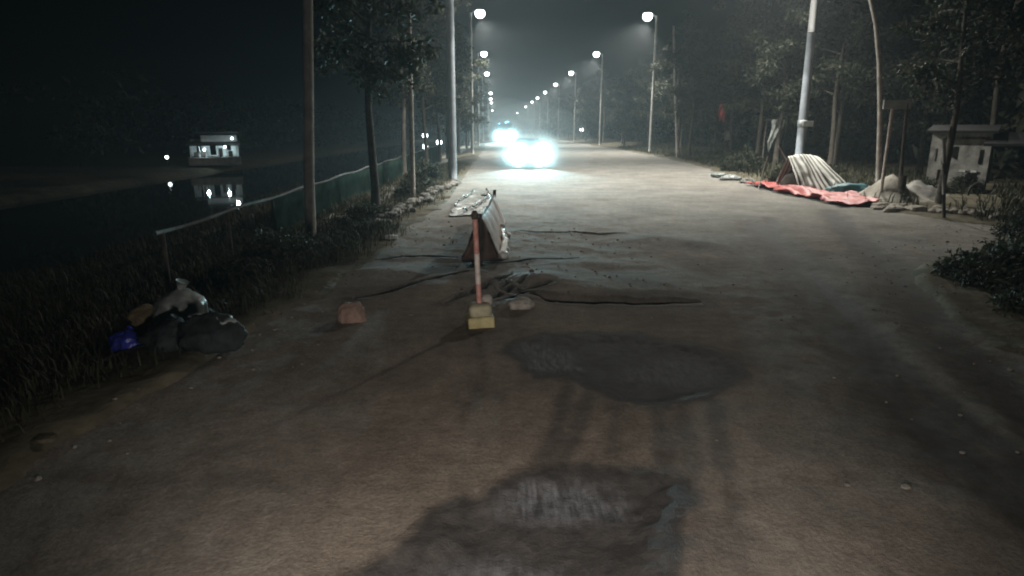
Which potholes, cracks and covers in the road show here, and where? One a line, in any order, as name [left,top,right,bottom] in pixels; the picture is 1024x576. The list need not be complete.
pothole [503,331,753,410]
pothole [340,462,697,576]
crack [349,255,705,308]
